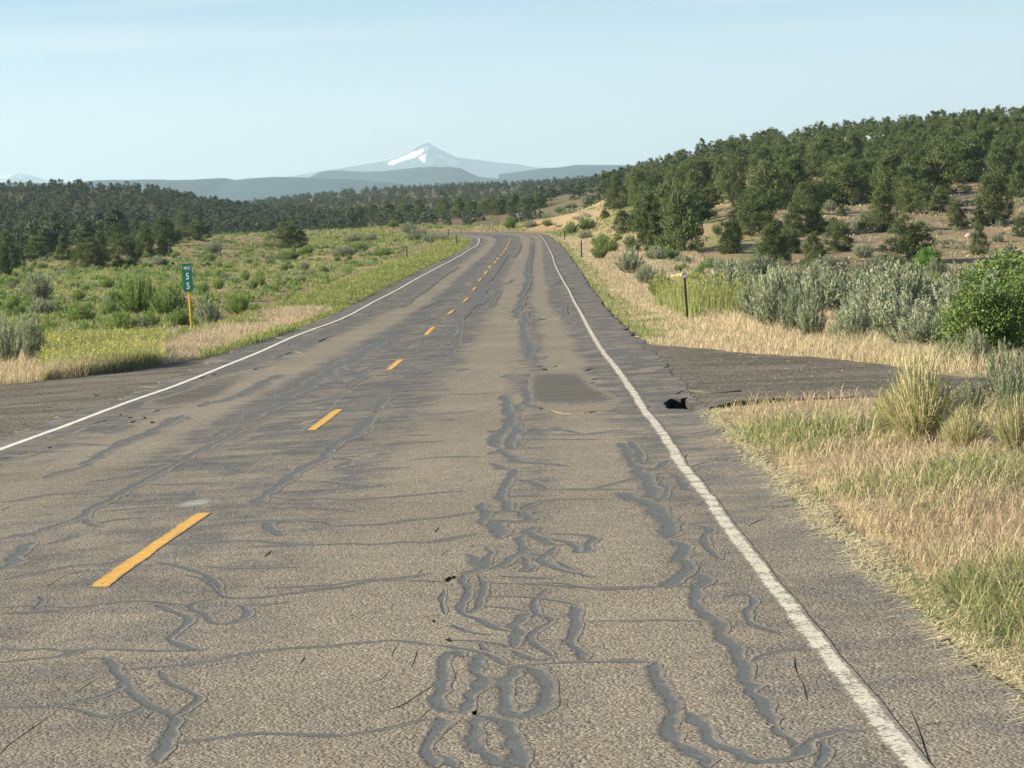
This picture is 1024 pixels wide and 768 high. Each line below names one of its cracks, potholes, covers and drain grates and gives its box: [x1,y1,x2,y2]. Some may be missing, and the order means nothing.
crack [346,645,431,719]
